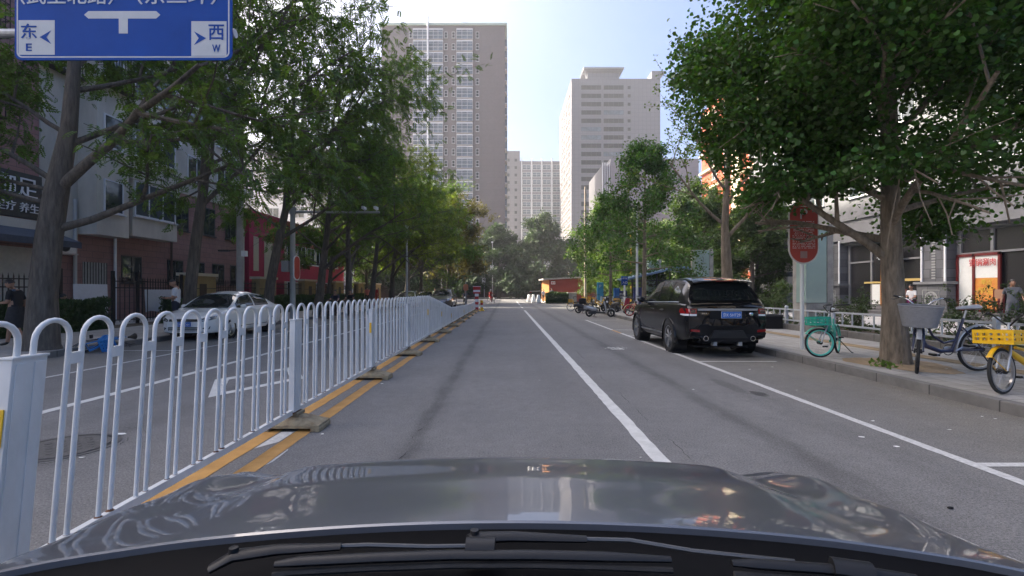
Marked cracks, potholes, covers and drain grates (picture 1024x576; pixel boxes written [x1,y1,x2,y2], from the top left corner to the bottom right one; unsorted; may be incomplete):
manhole cover [38,433,122,462]
